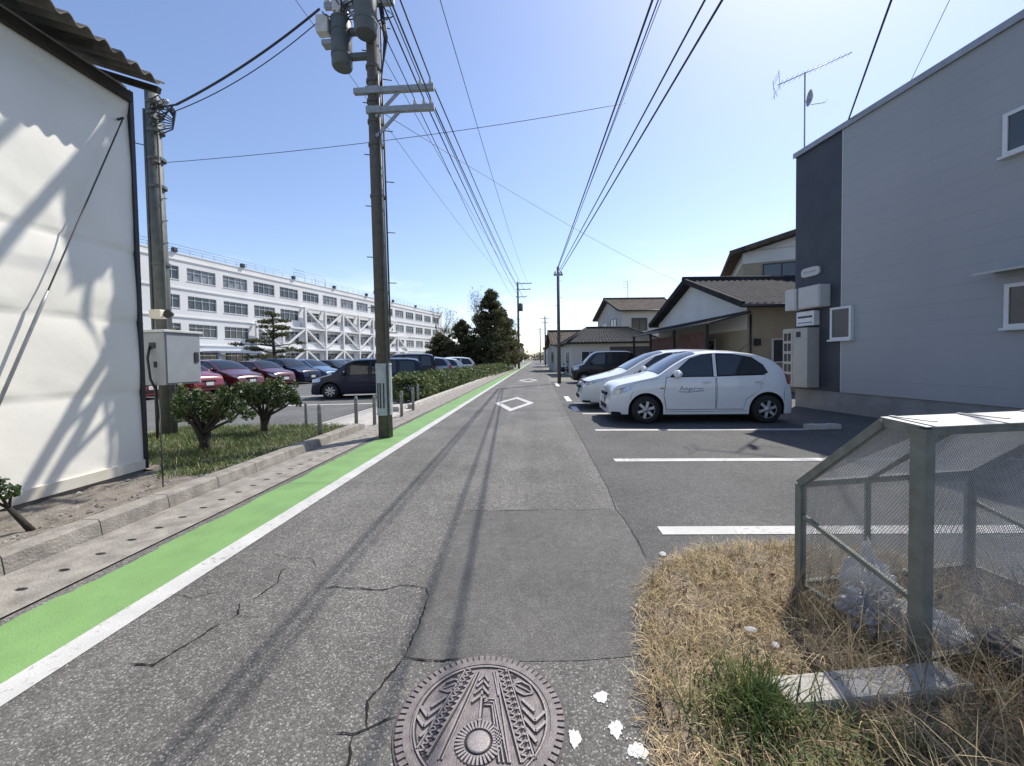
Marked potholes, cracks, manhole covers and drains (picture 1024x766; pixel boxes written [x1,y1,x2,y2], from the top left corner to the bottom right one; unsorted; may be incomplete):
crack [326,584,429,766]
manhole cover [392,655,567,766]
crack [129,553,317,665]
